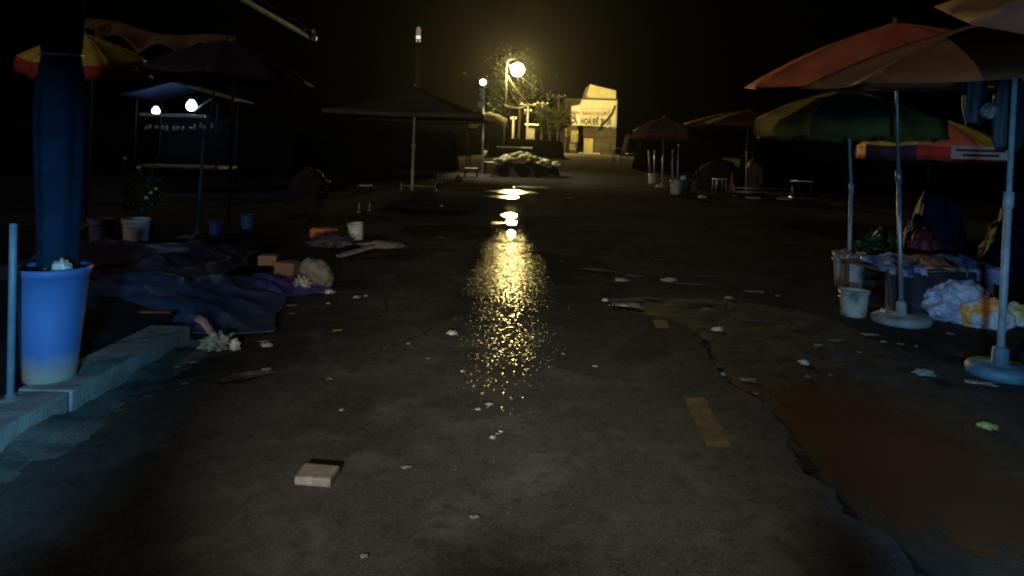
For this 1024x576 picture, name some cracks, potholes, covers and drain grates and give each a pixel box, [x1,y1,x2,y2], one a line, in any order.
crack [357,298,432,357]
